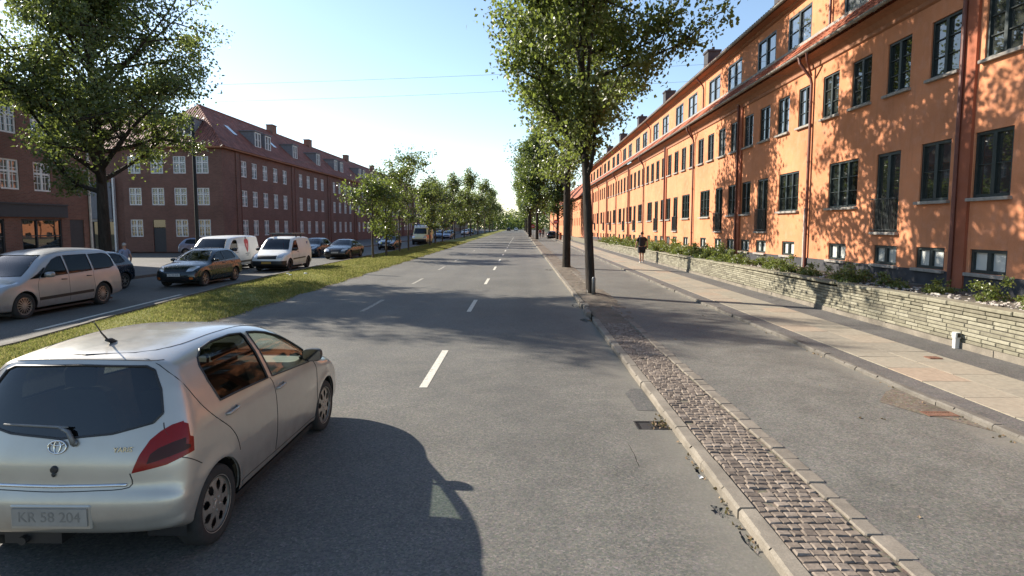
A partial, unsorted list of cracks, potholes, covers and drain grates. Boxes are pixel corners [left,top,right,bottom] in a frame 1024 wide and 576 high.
drain grate [633,421,670,430]
